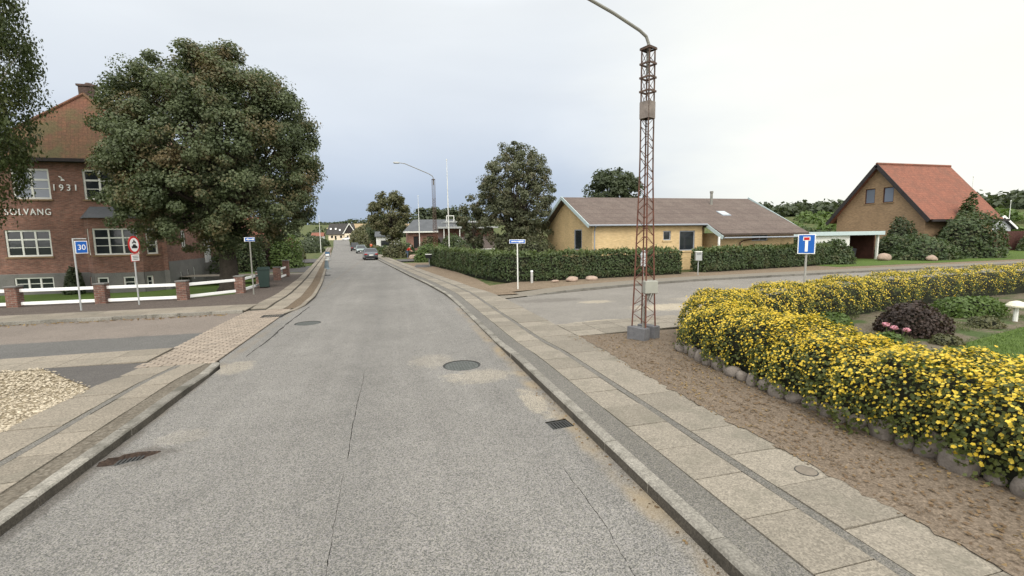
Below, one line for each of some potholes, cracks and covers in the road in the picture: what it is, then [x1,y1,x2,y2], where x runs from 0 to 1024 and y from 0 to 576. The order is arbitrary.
drain grate [96,451,161,467]
drain grate [546,420,573,430]
manhole cover [443,360,481,371]
crack [563,467,635,576]
crack [326,371,365,573]
utility cover [794,466,819,476]
